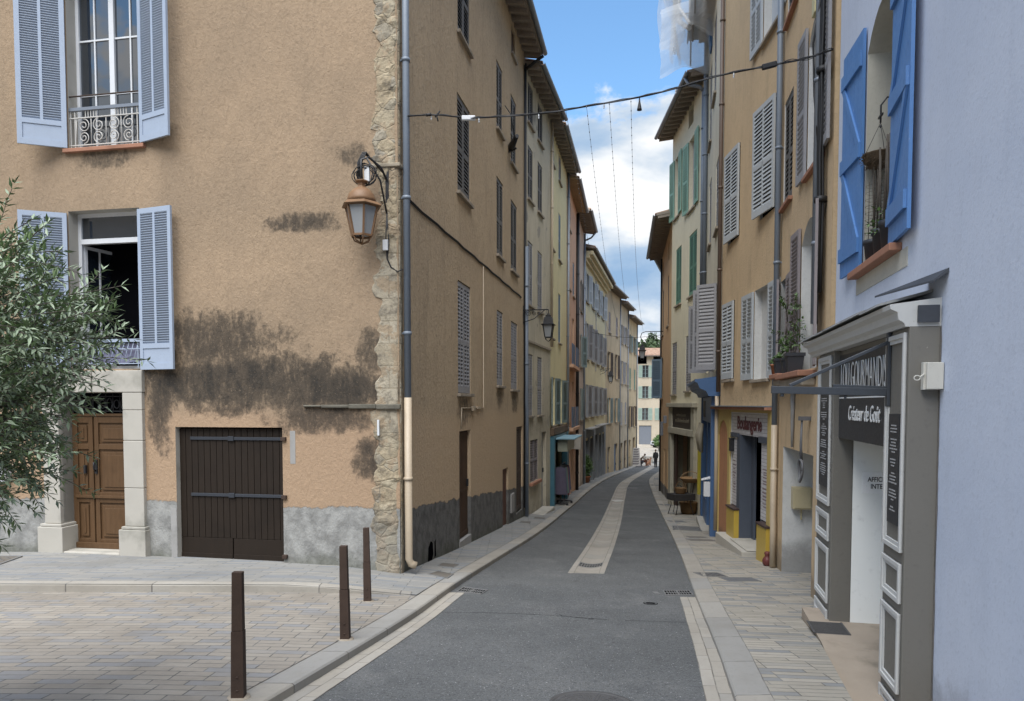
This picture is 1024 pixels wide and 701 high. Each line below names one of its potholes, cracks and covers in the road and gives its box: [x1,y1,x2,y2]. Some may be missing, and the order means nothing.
manhole cover [549,691,631,701]
